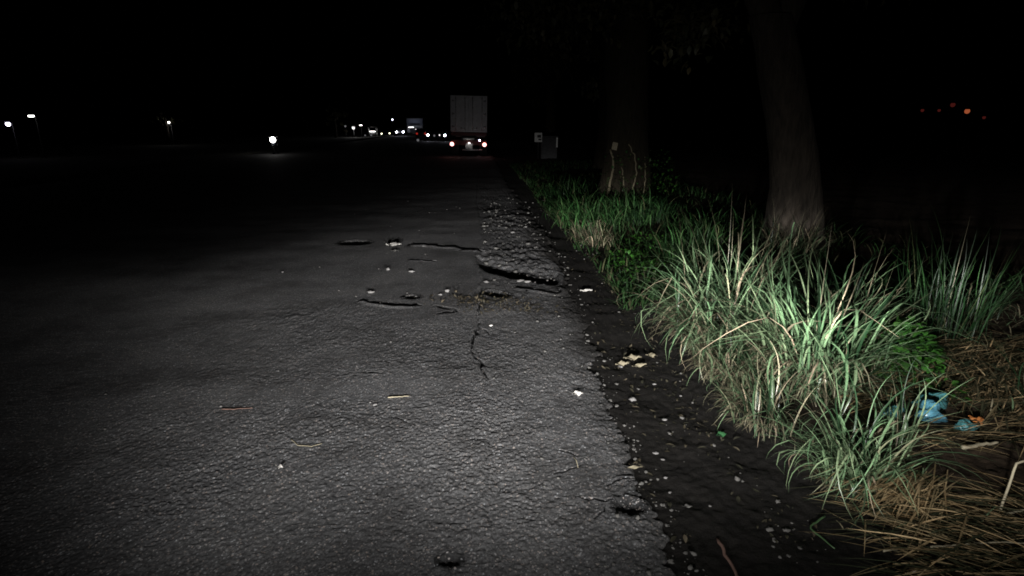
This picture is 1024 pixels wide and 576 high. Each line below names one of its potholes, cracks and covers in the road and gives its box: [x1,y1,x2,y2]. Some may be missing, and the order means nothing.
pothole [472,249,564,286]
crack [406,243,486,263]
pothole [480,289,515,299]
pothole [609,494,650,517]
pothole [434,550,465,570]
